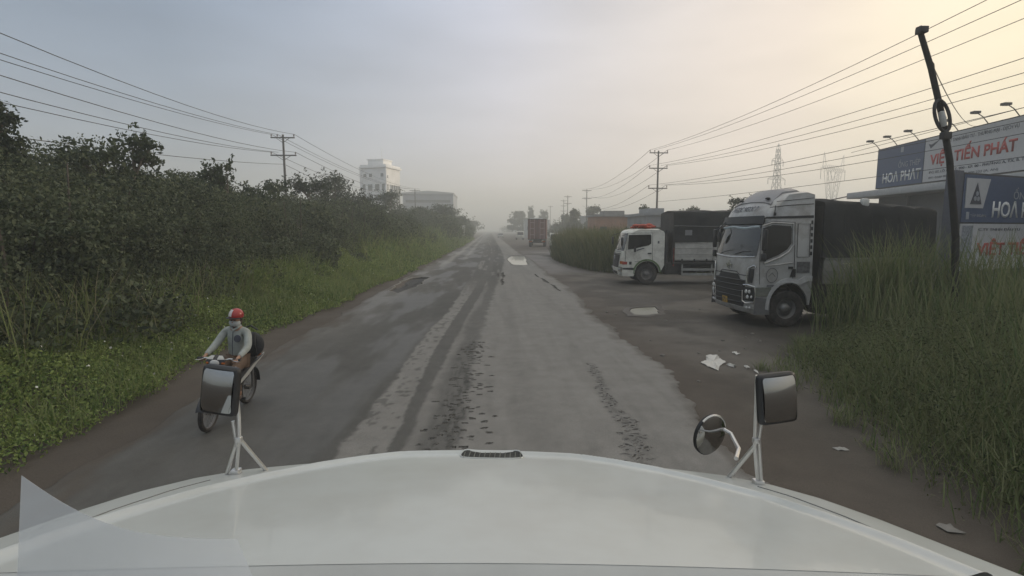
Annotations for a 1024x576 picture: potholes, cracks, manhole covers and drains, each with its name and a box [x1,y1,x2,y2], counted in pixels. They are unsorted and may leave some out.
crack [534,274,561,291]
pothole [387,276,430,293]
